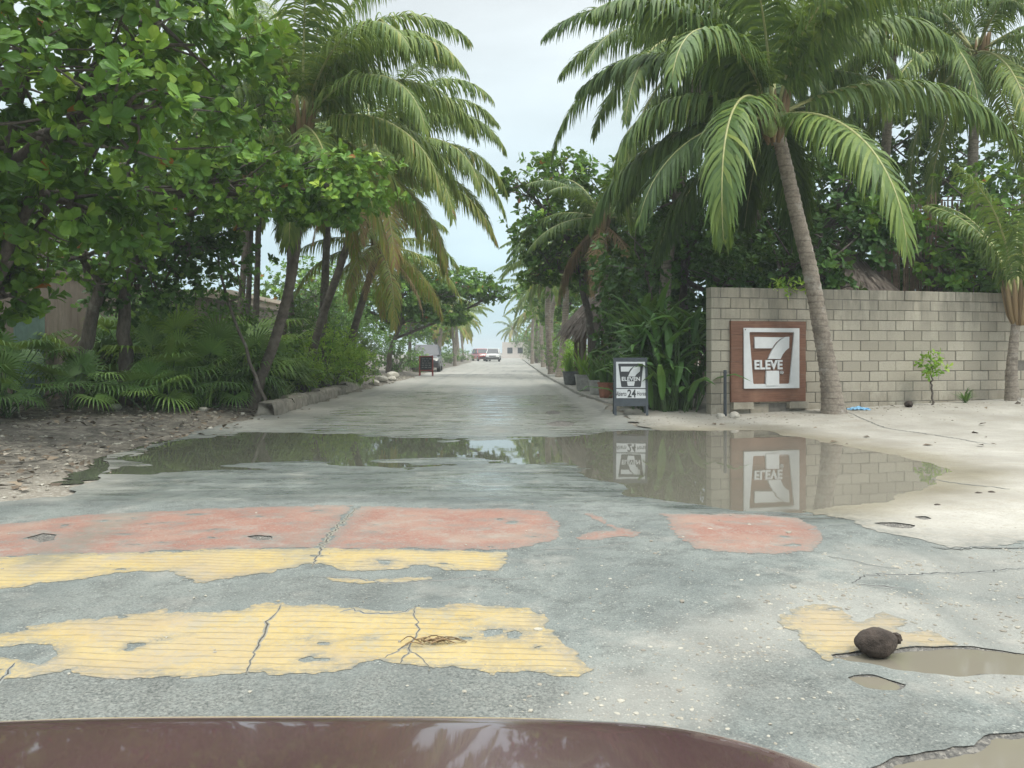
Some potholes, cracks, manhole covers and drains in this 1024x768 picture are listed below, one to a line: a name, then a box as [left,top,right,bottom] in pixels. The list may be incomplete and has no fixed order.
crack [341,606,430,668]
crack [246,605,281,674]
pothole [28,534,56,542]
pothole [871,731,1024,768]
pothole [848,674,906,690]
pothole [832,646,1024,676]
crack [829,556,1024,589]
